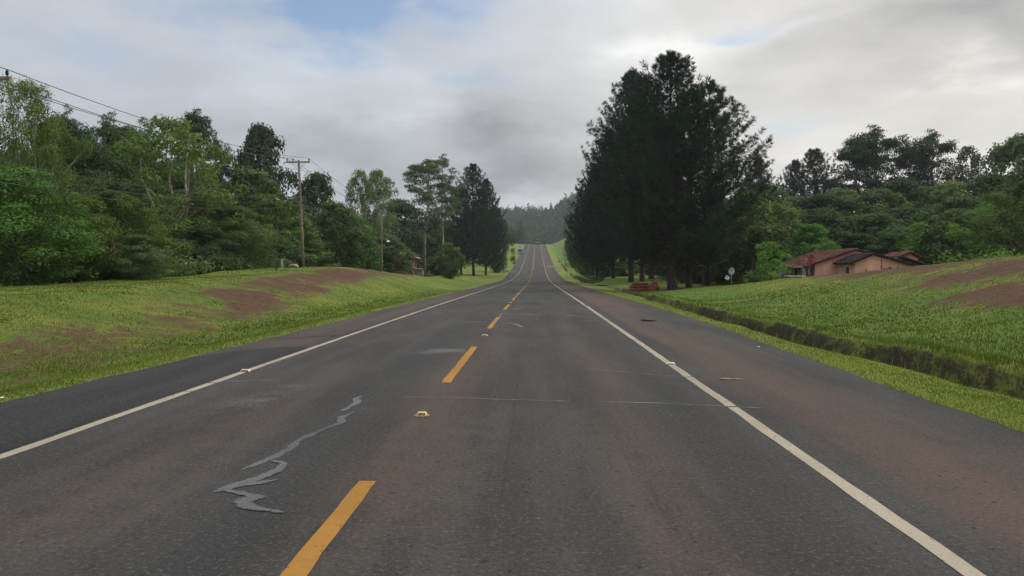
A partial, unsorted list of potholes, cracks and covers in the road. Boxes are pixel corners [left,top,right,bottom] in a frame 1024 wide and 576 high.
crack [213,394,368,513]
